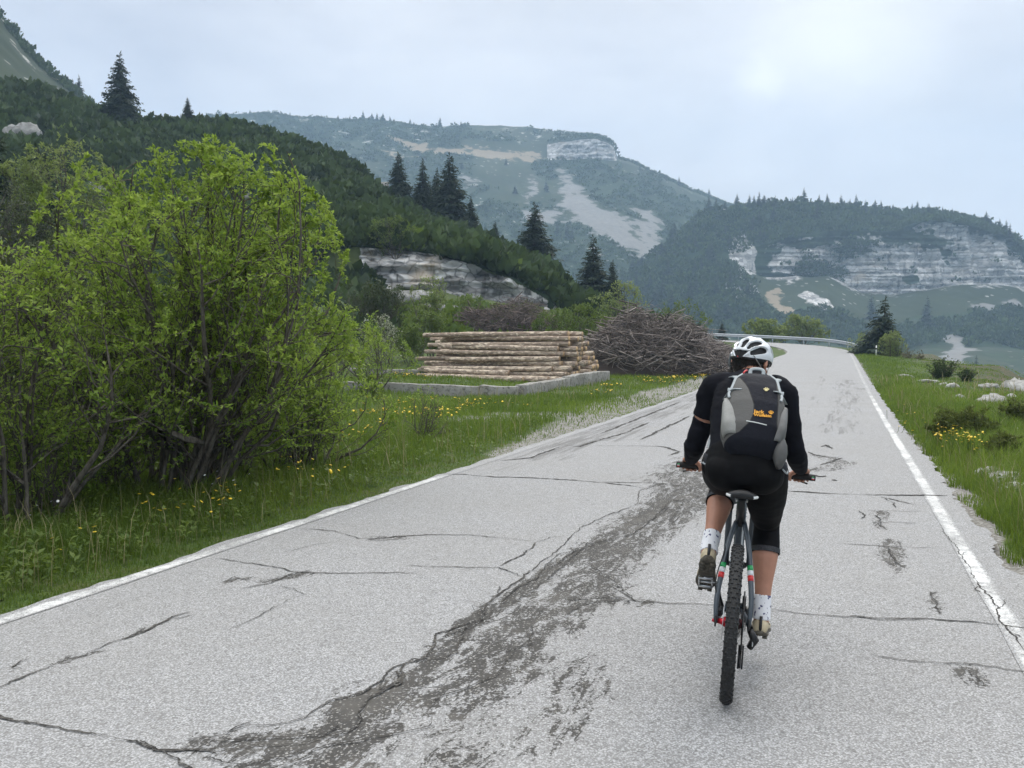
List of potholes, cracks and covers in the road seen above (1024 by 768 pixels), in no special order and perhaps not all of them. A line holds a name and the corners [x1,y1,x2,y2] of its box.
crack [567,445,1024,686]
crack [465,402,689,488]
crack [0,474,705,768]
